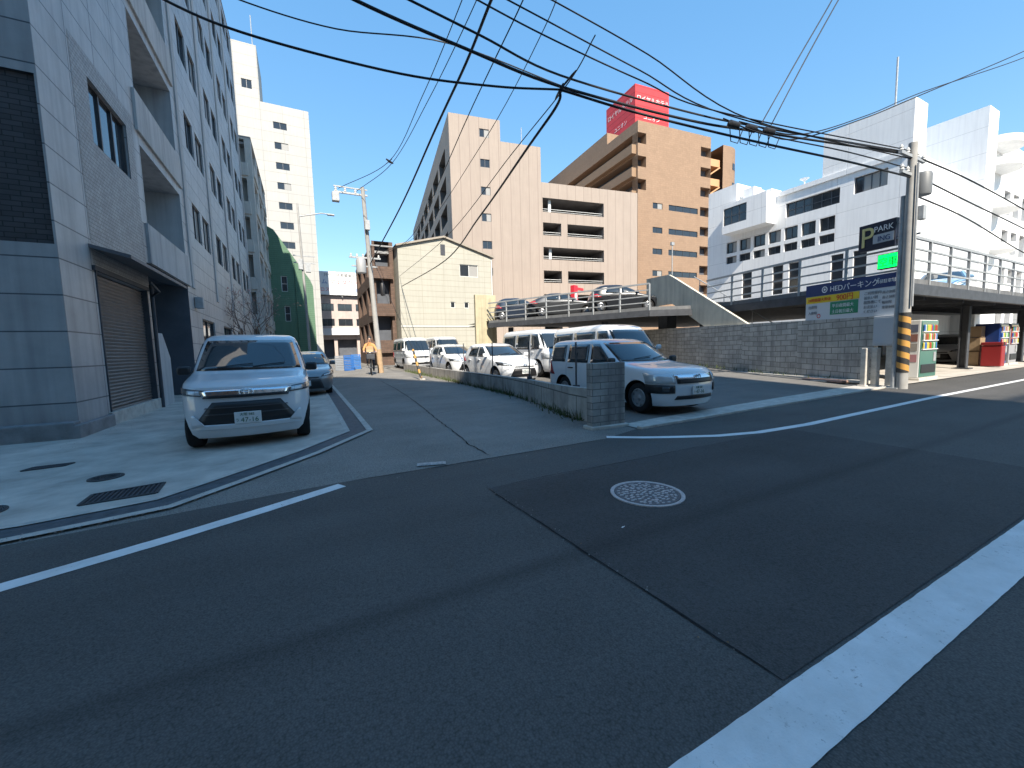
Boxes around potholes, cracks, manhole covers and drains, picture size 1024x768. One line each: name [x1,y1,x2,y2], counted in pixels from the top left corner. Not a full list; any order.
manhole cover [610,481,686,508]
manhole cover [86,473,125,482]
drain grate [76,482,166,506]
crack [383,382,516,455]
